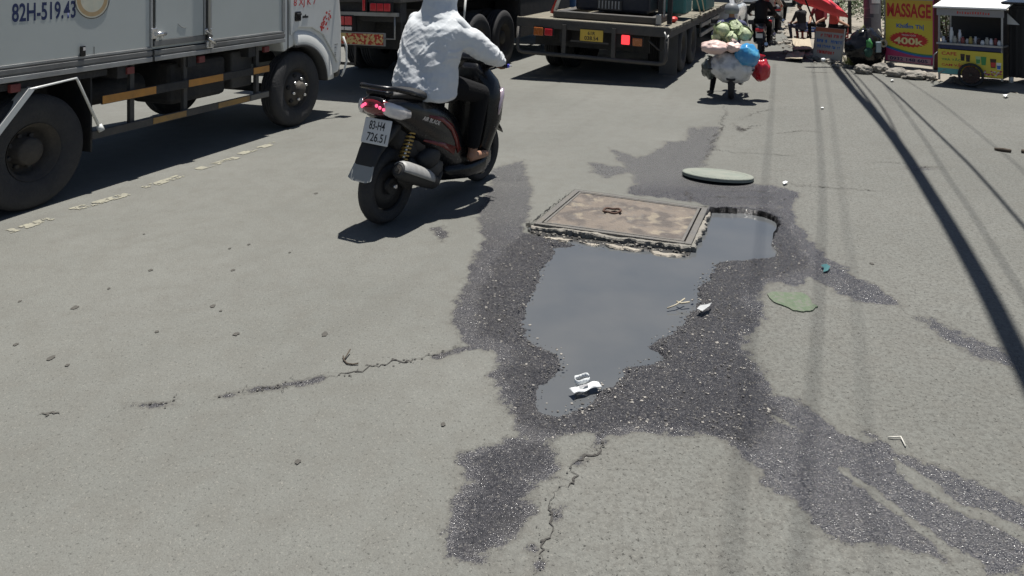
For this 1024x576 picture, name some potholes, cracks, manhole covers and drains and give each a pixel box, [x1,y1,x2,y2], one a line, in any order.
pothole [703,206,784,265]
manhole cover [682,168,754,185]
crack [530,428,605,576]
pothole [507,189,731,422]
crack [216,339,485,398]
manhole cover [530,189,711,258]
